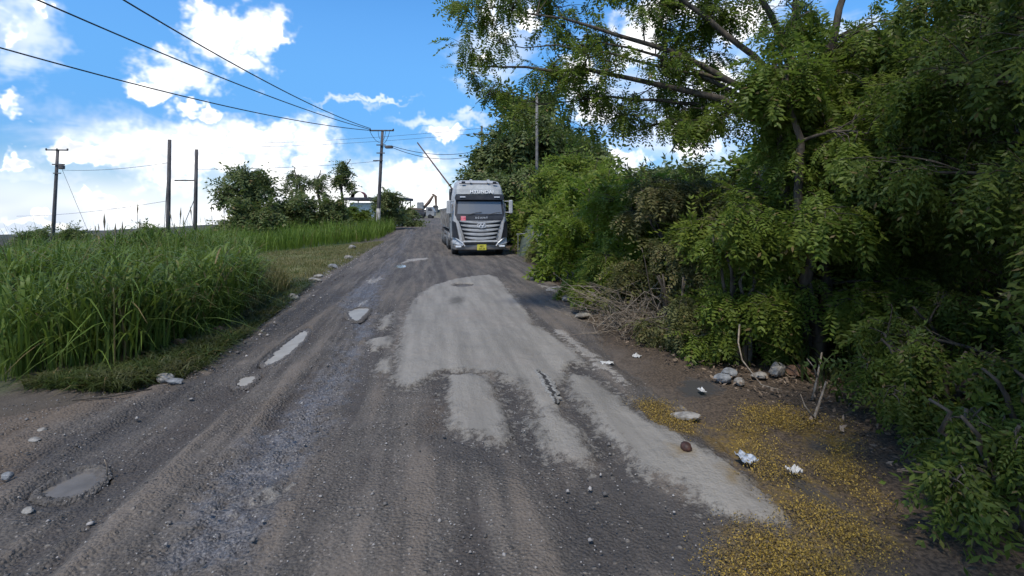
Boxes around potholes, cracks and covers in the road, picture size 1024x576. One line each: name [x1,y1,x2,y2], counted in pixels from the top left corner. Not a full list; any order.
pothole [344,307,373,323]
pothole [259,328,312,368]
pothole [28,463,114,507]
pothole [229,373,262,391]
crack [534,368,562,403]
